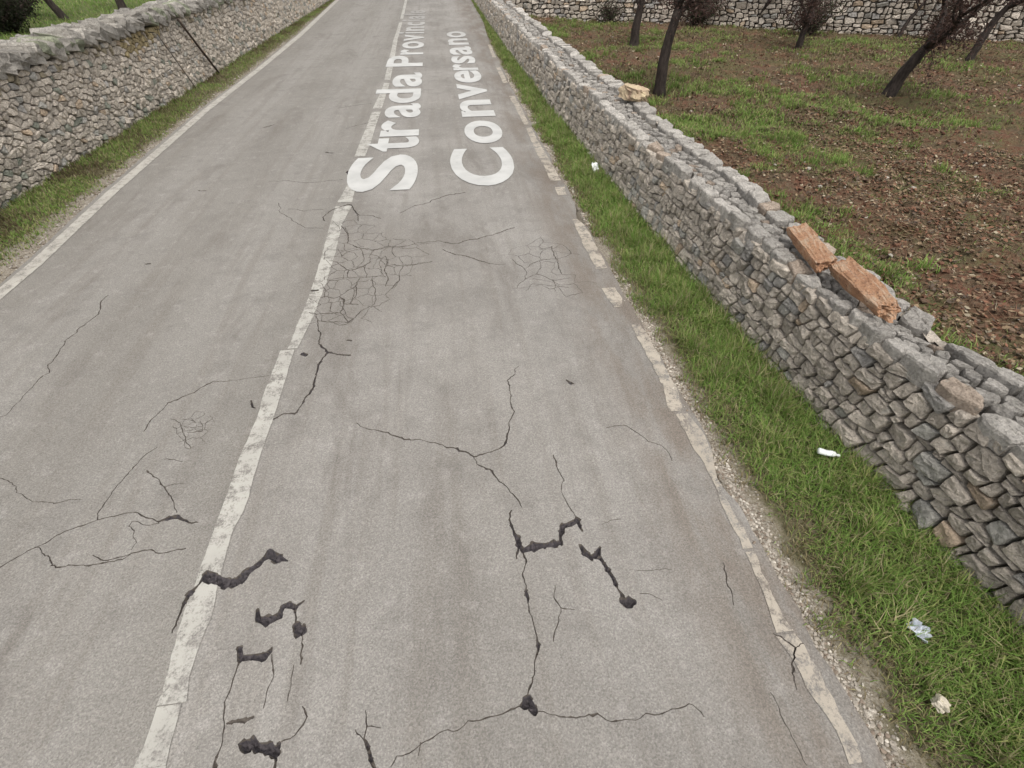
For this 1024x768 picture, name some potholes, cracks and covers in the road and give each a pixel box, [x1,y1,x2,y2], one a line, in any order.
crack [538,703,704,722]
pothole [238,734,281,768]
crack [212,662,240,768]
crack [1,295,109,417]
crack [273,203,671,768]
crack [0,375,308,742]
pothole [519,694,538,716]
